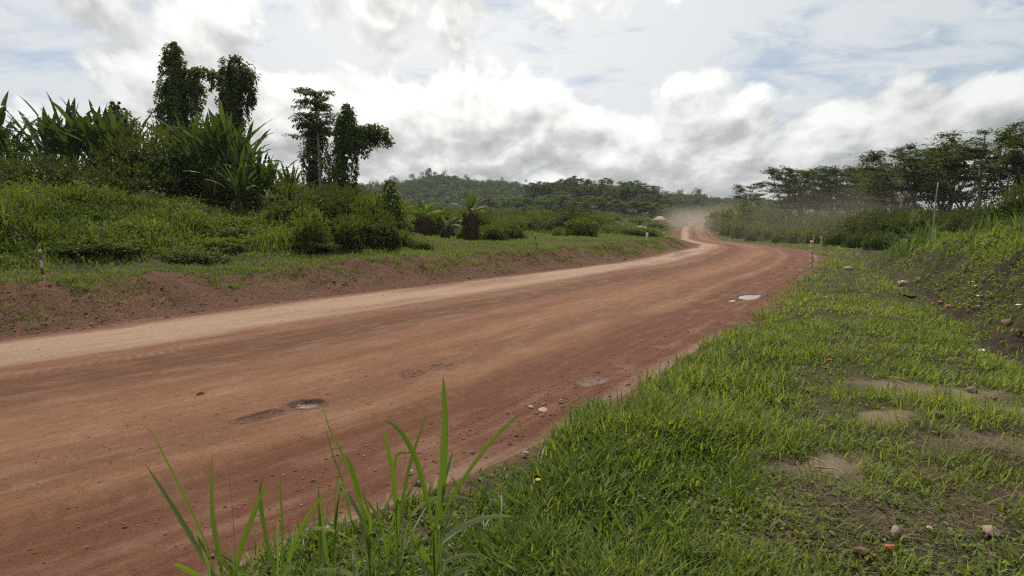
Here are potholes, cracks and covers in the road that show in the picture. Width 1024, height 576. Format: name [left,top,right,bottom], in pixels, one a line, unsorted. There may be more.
pothole [574,376,612,388]
pothole [398,369,425,378]
pothole [734,293,768,301]
pothole [281,398,329,411]
pothole [229,408,291,424]
pothole [426,363,458,371]
